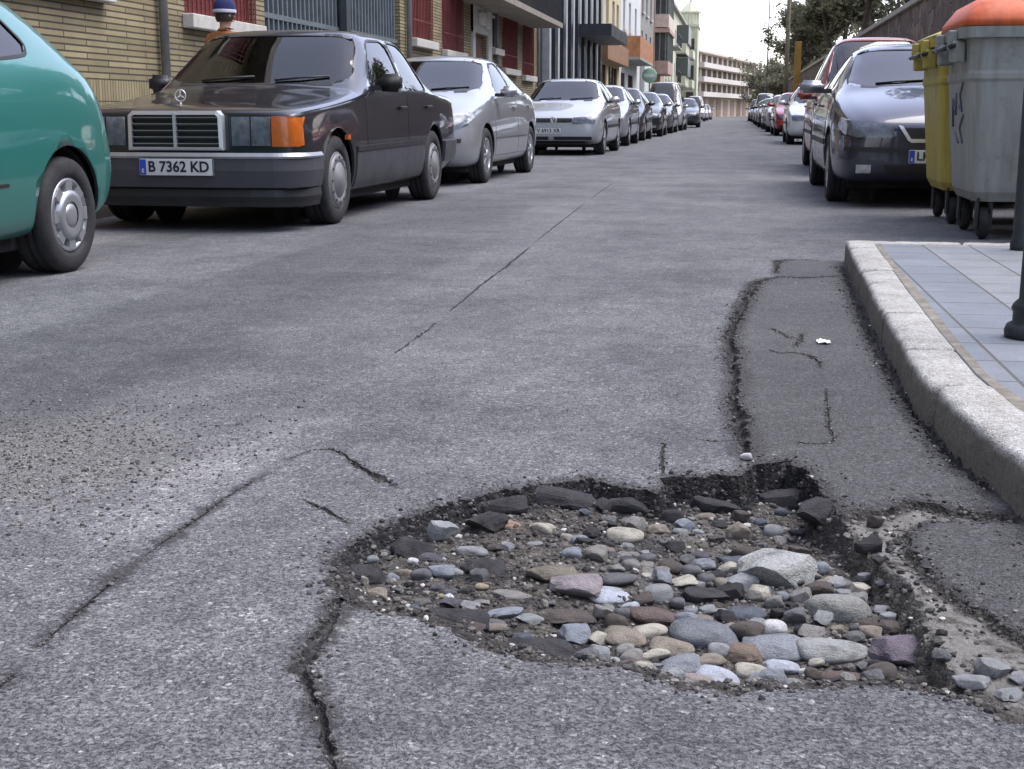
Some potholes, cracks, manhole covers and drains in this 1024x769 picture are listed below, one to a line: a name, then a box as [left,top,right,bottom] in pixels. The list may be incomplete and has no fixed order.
crack [697,259,992,493]
crack [287,597,345,769]
crack [288,449,396,524]
pothole [328,461,1024,726]
